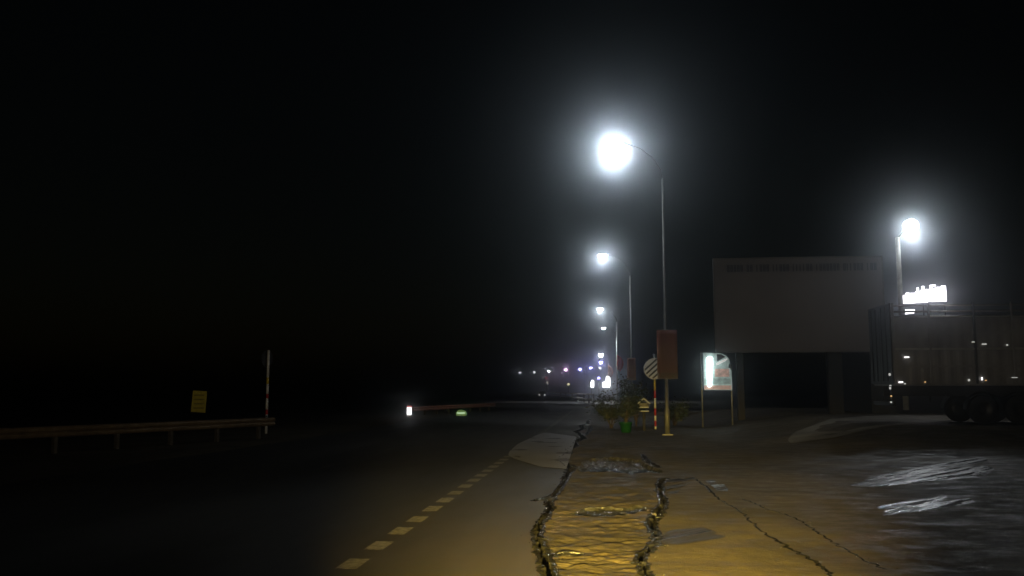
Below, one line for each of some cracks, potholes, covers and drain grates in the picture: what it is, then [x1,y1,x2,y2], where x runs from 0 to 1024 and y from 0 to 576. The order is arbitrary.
crack [630,454,670,576]
pothole [577,457,662,474]
crack [696,479,885,576]
crack [530,419,594,576]
